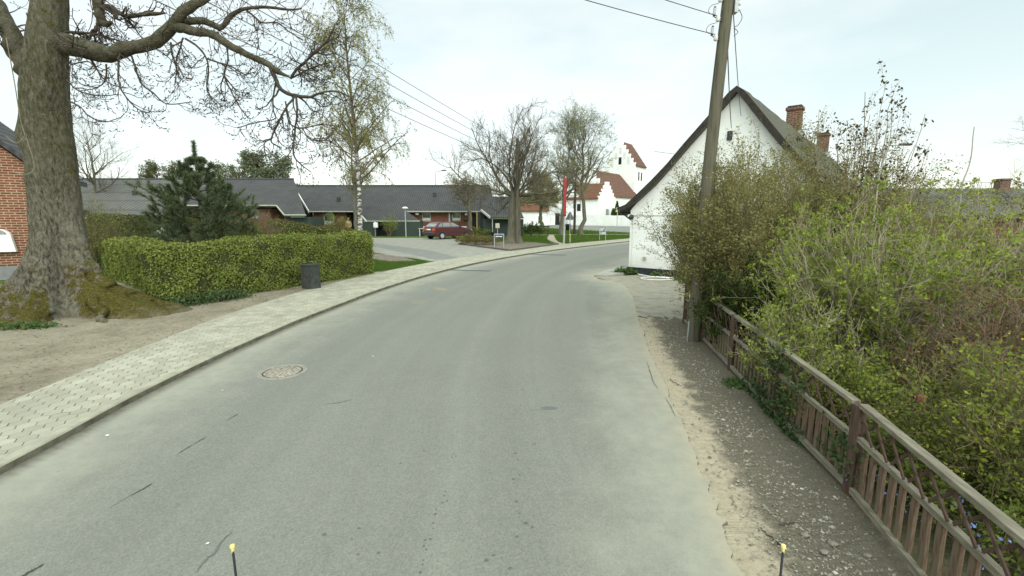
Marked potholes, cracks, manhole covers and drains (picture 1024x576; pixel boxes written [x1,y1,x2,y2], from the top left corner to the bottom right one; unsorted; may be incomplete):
crack [198,534,229,571]
manhole cover [256,364,308,380]
